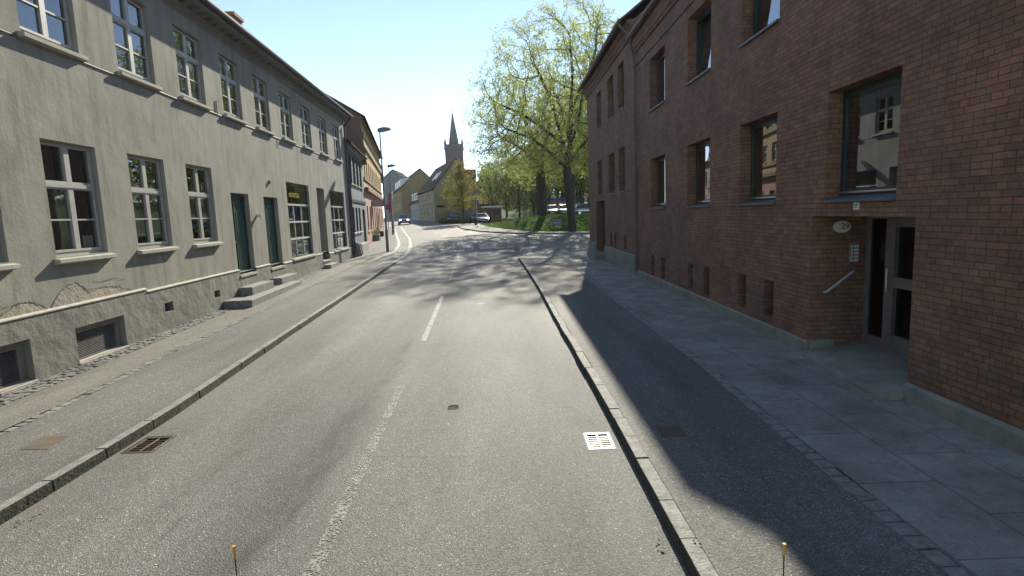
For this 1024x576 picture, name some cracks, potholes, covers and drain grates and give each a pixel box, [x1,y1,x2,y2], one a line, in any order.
drain grate [582,431,618,450]
drain grate [120,435,177,454]
